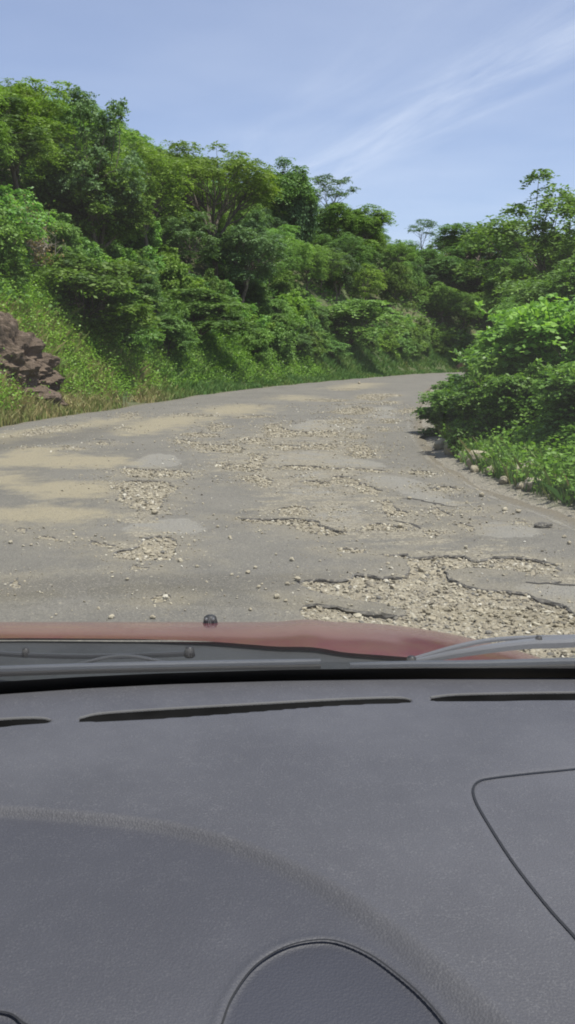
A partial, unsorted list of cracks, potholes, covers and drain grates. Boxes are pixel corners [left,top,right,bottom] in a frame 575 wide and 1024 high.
pothole [296,553,575,658]
pothole [344,444,377,458]
pothole [262,424,340,438]
pothole [235,517,348,537]
pothole [268,443,341,451]
pothole [239,474,274,488]
pothole [276,505,312,517]
pothole [356,522,413,532]
pothole [112,536,178,561]
pothole [109,480,178,511]
